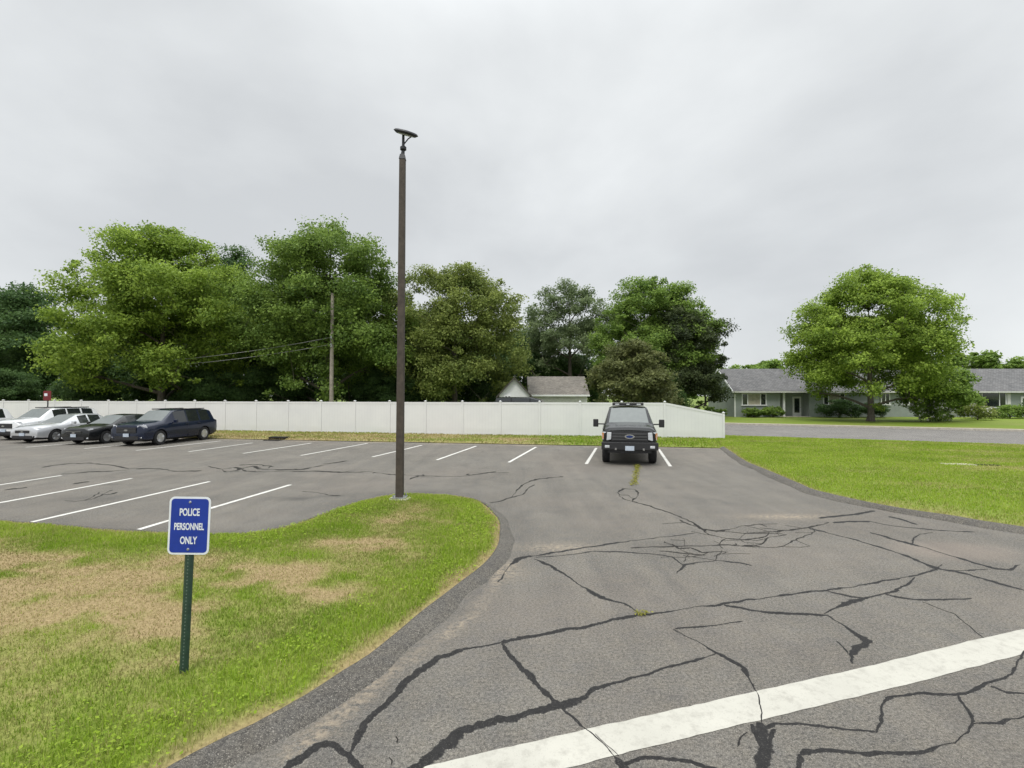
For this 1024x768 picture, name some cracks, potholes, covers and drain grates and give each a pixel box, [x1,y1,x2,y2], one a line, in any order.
crack [490,476,563,503]
crack [41,461,496,502]
crack [497,488,1024,638]
crack [501,621,877,768]
